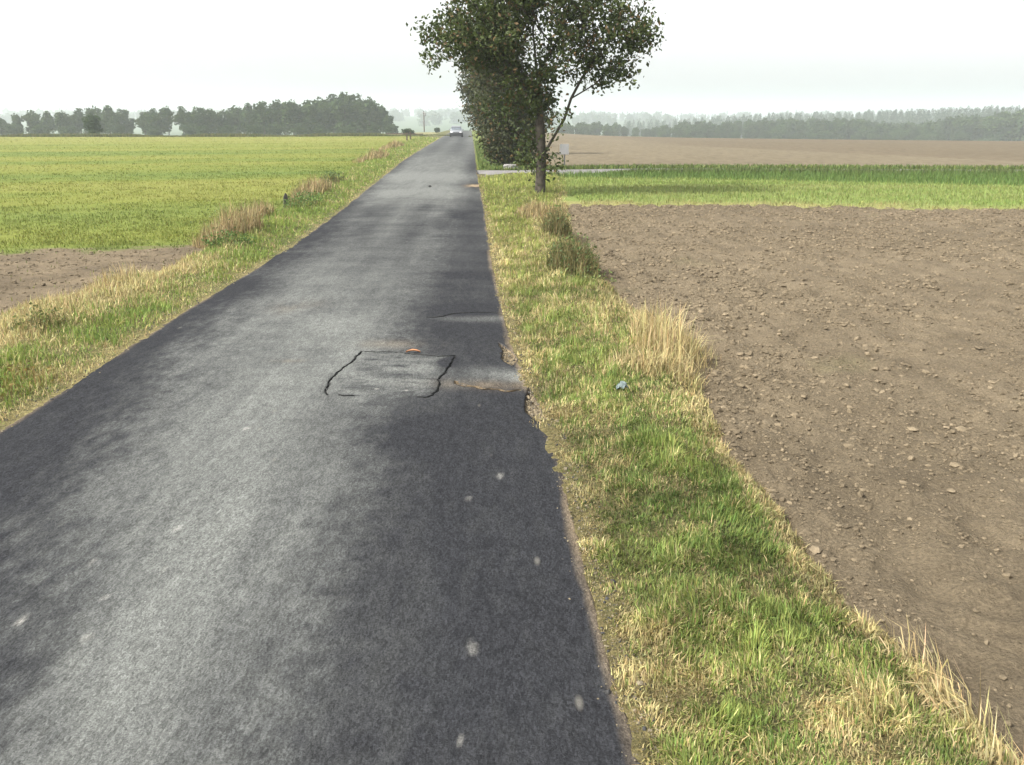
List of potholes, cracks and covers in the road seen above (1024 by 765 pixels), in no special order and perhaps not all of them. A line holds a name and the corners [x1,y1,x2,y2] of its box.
pothole [498,342,518,366]
pothole [524,389,545,421]
